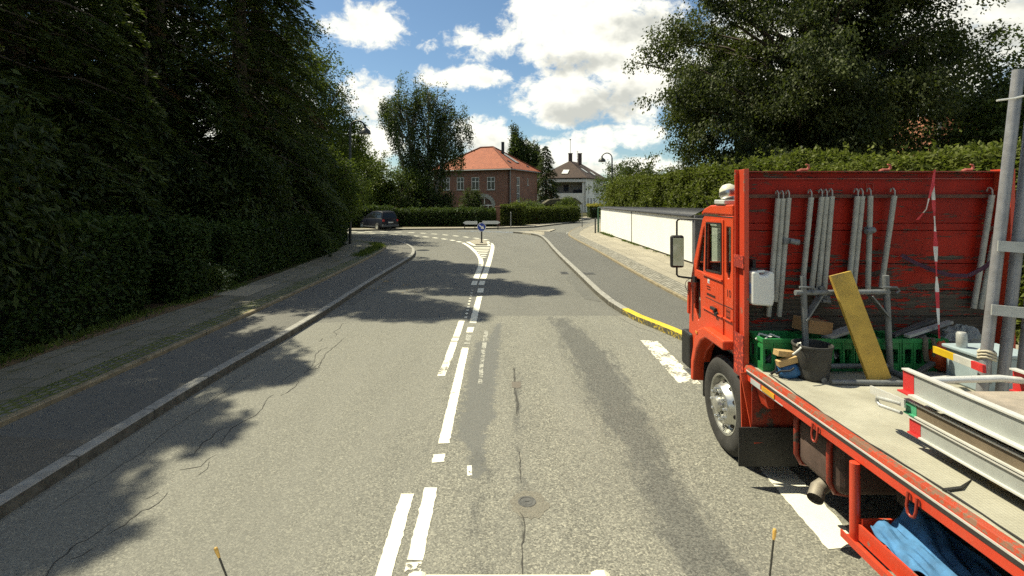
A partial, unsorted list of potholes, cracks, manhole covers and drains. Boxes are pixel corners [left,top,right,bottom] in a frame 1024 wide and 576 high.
crack [177,324,342,474]
crack [56,375,249,508]
crack [46,493,166,576]
manhole cover [510,490,550,519]
